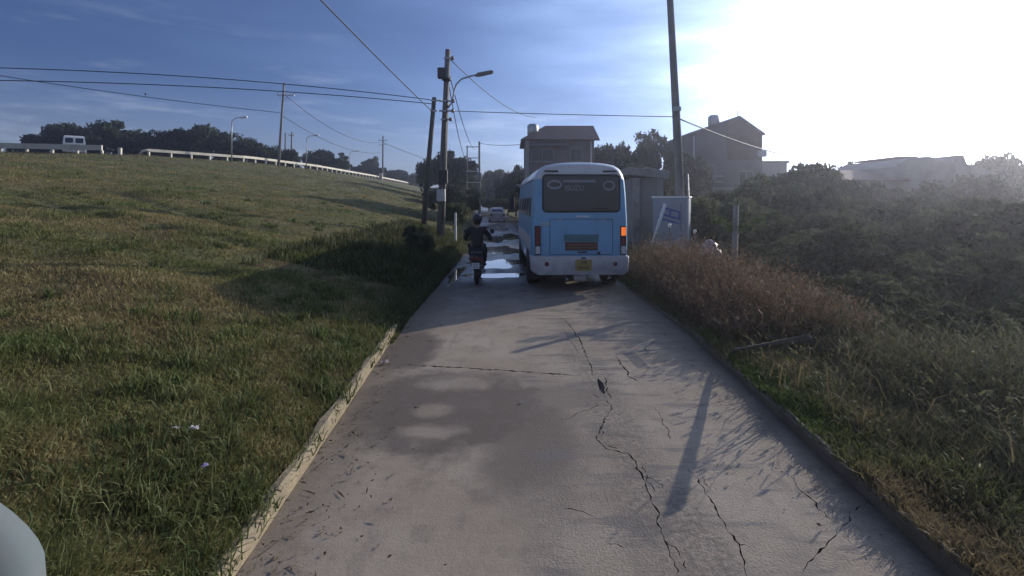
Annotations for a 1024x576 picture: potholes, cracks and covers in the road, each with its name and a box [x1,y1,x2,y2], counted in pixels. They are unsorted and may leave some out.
crack [560,317,686,574]
crack [789,474,867,573]
crack [688,469,747,576]
